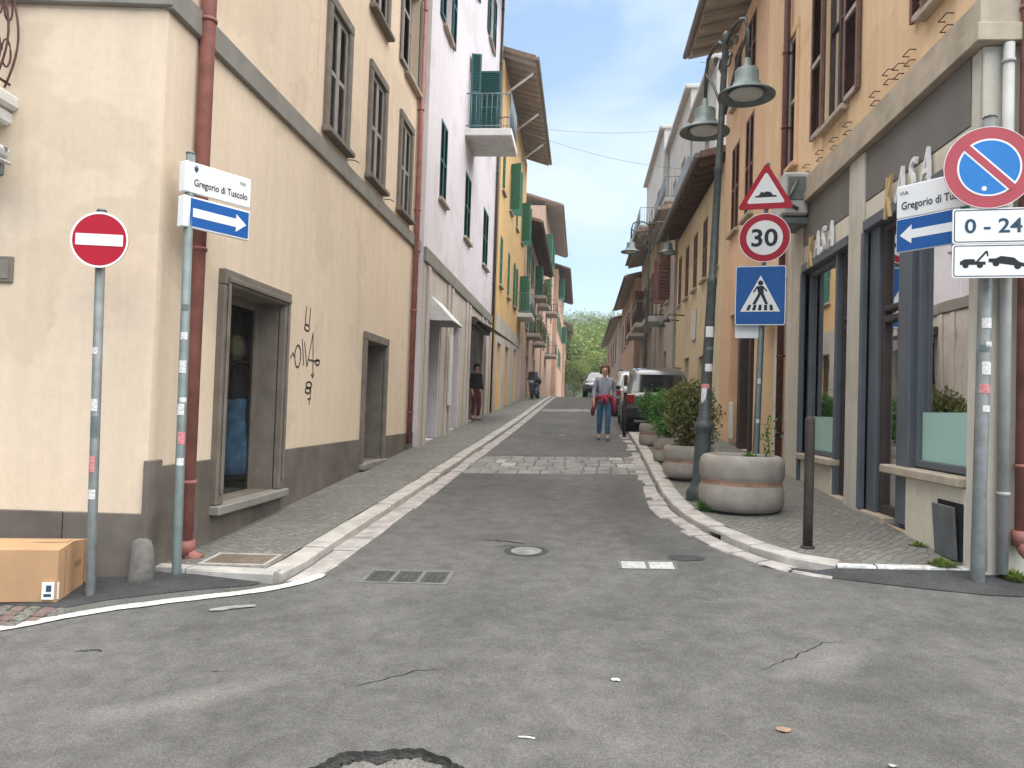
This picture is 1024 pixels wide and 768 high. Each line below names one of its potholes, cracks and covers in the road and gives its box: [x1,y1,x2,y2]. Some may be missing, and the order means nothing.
crack [764,642,851,670]
manhole cover [504,546,548,556]
crack [344,668,443,688]
manhole cover [618,560,679,570]
manhole cover [198,553,283,568]
pothole [309,748,464,768]
crack [487,539,524,547]
